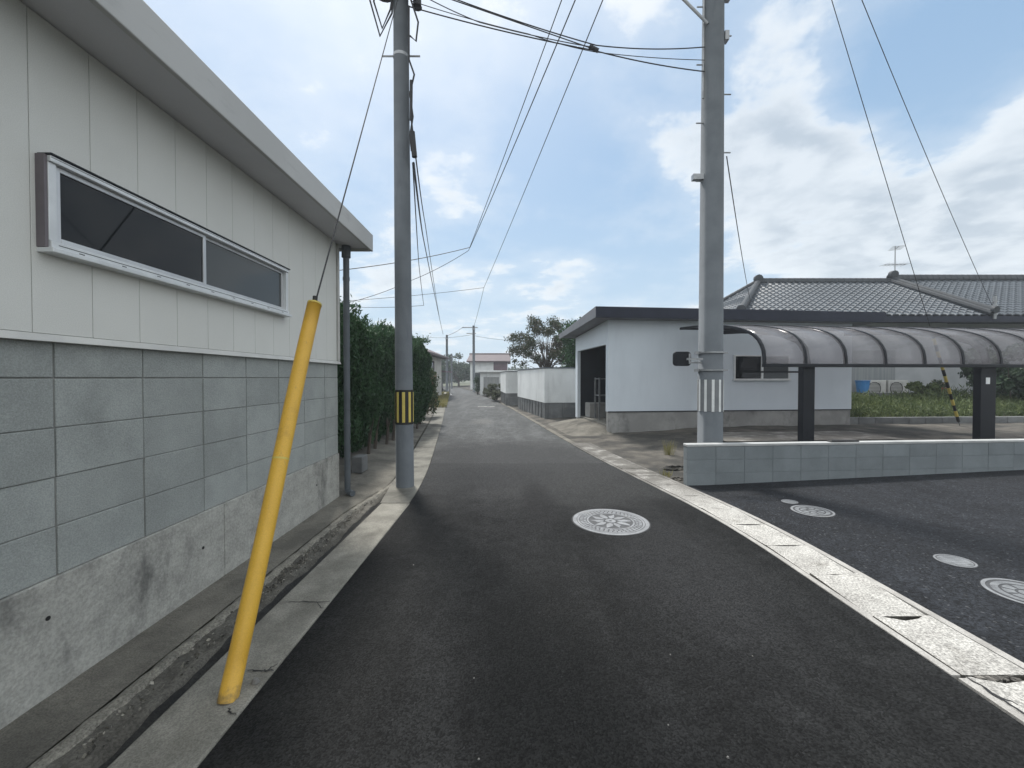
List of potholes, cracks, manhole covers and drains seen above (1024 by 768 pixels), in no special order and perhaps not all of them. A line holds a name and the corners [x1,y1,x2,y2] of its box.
manhole cover [979,578,1024,605]
manhole cover [932,554,979,568]
manhole cover [572,509,651,536]
crack [967,677,1024,714]
manhole cover [790,505,836,517]
